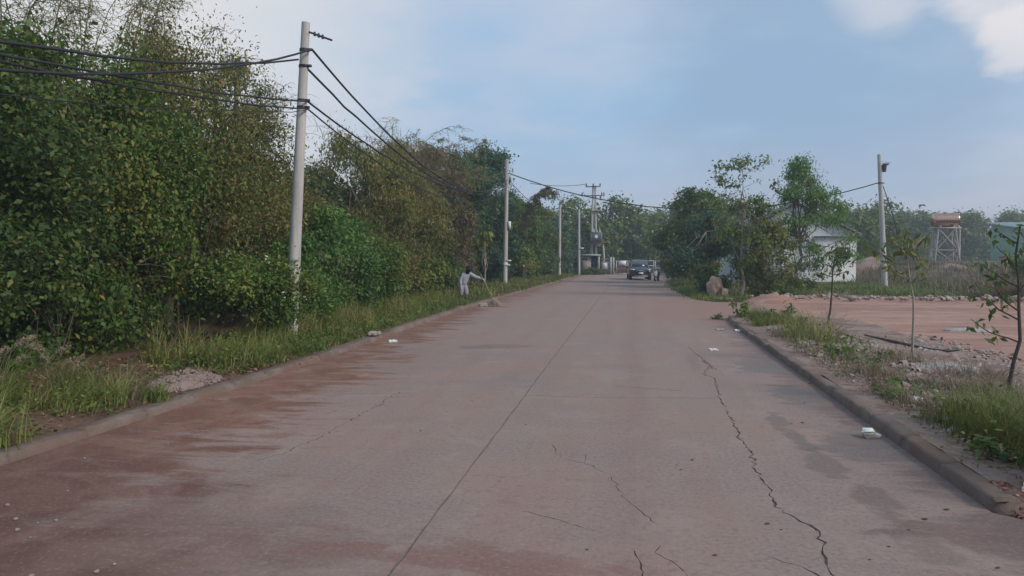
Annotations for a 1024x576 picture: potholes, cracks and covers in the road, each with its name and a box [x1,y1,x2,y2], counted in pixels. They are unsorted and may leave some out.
crack [259,392,400,461]
crack [634,545,688,576]
crack [553,446,657,524]
crack [688,347,834,576]
